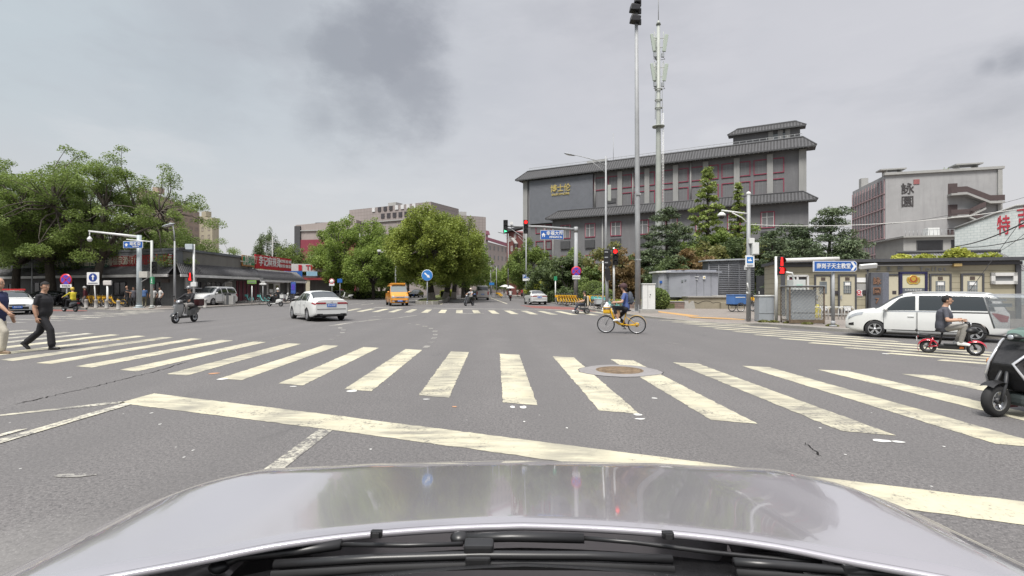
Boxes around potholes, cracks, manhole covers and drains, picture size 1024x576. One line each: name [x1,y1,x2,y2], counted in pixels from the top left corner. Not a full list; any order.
manhole cover [578,365,664,377]
